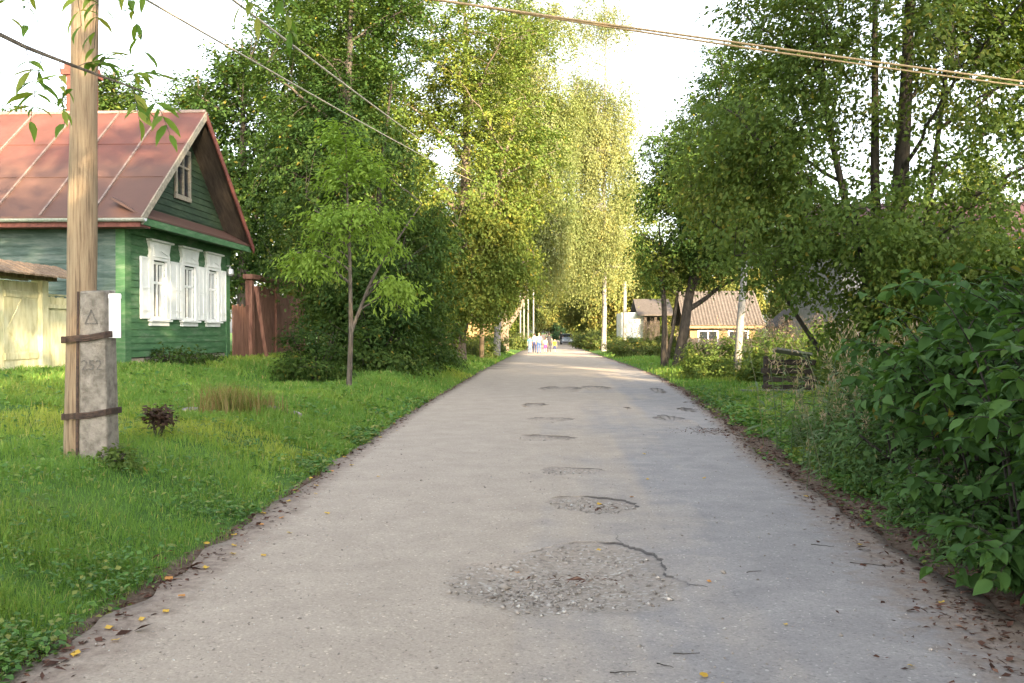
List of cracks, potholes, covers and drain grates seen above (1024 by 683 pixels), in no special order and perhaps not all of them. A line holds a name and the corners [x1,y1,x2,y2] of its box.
pothole [652,415,699,423]
pothole [539,467,606,475]
pothole [435,541,690,622]
pothole [541,496,640,515]
